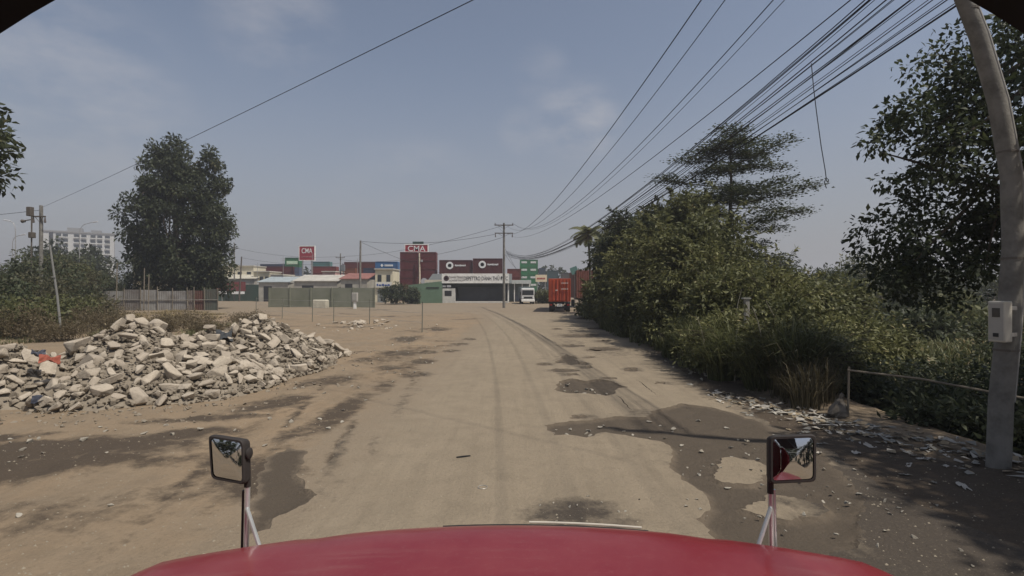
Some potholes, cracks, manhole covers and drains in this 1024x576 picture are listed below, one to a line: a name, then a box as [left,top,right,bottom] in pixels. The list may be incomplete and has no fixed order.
pothole [554,378,626,396]
